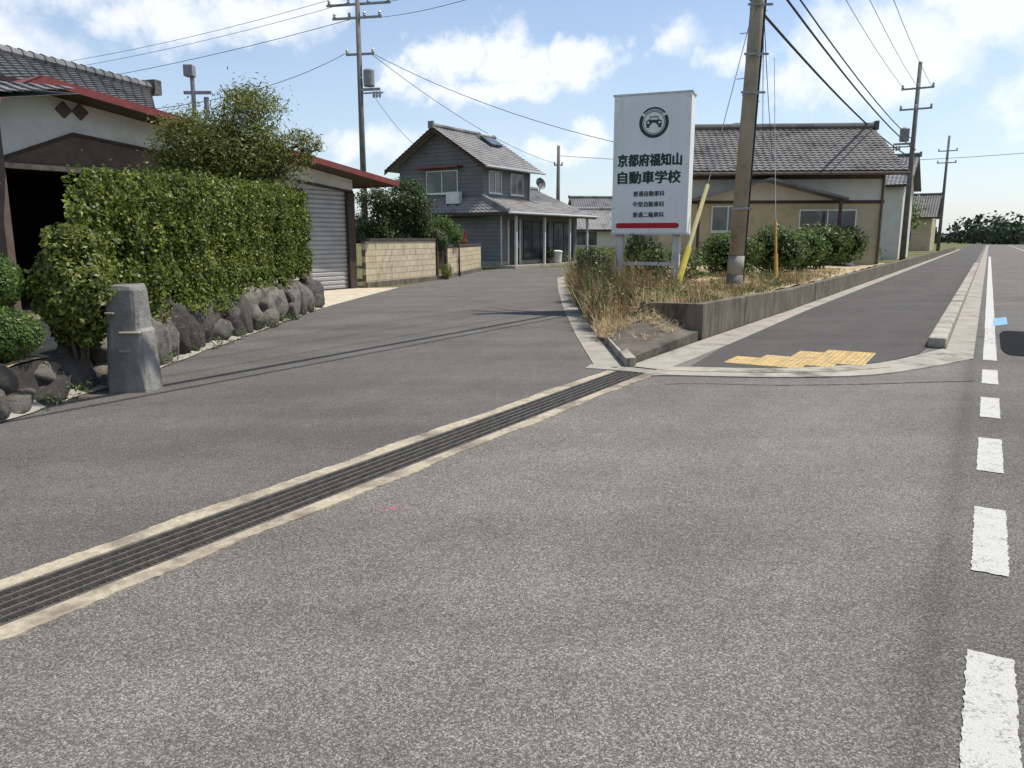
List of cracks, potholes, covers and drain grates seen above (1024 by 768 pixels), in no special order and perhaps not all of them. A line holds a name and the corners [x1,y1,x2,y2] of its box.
drain grate [578,371,642,390]
drain grate [466,403,558,432]
drain grate [276,454,422,504]
drain grate [0,550,155,626]
drain grate [385,425,499,462]
drain grate [116,493,313,566]
drain grate [528,385,606,408]
